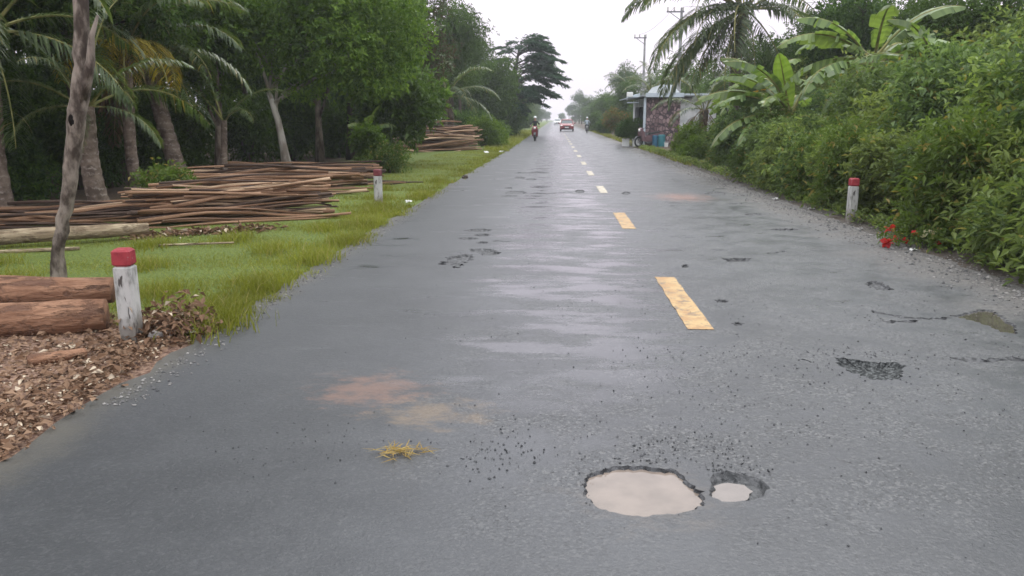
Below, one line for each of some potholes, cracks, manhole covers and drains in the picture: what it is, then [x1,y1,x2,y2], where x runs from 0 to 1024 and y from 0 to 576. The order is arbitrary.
pothole [470,248,502,256]
pothole [709,471,770,502]
pothole [866,281,894,291]
pothole [950,309,1017,334]
pothole [583,465,705,517]
pothole [440,254,474,268]
pothole [835,357,906,380]
crack [871,310,948,324]
